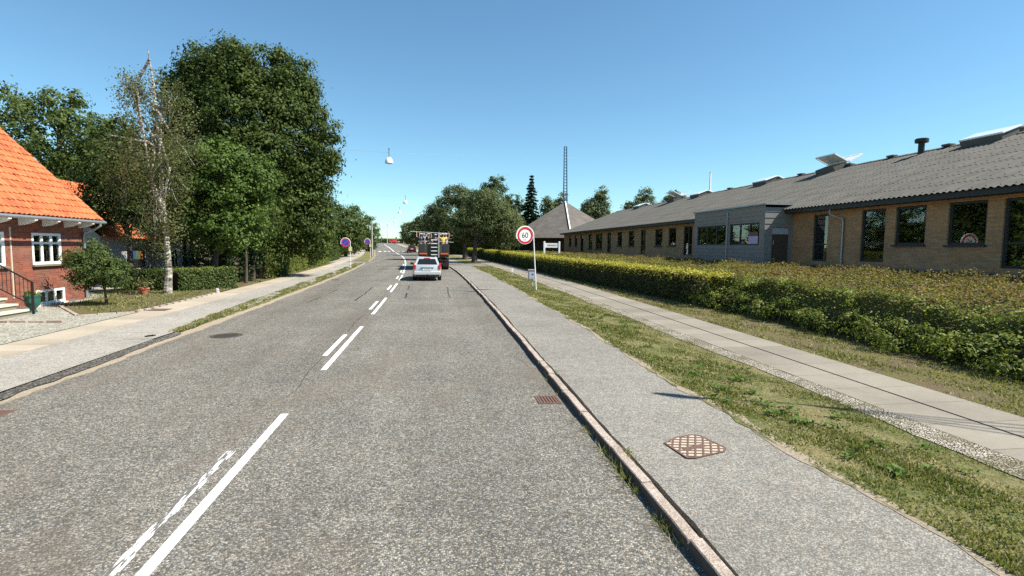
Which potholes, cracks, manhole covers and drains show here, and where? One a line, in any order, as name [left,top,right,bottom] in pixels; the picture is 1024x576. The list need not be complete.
manhole cover [664,434,727,458]
drain grate [534,395,562,404]
